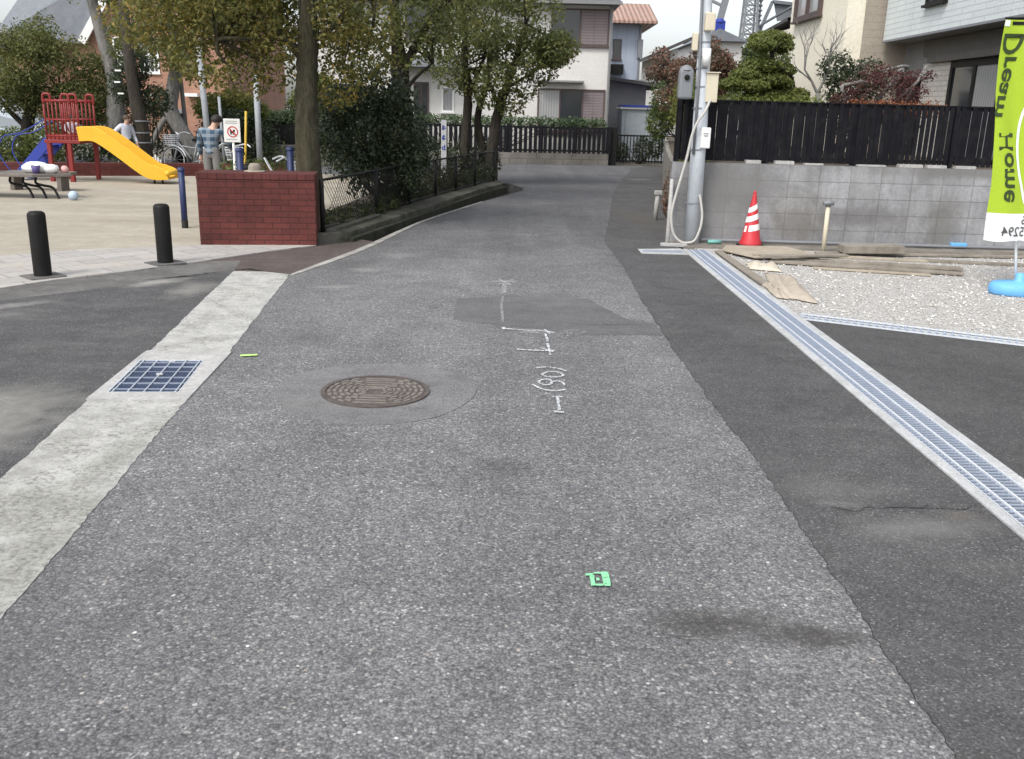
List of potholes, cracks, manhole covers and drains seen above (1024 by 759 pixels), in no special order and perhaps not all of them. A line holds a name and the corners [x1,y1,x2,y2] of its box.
crack [823,502,978,511]
manhole cover [321,375,430,408]
